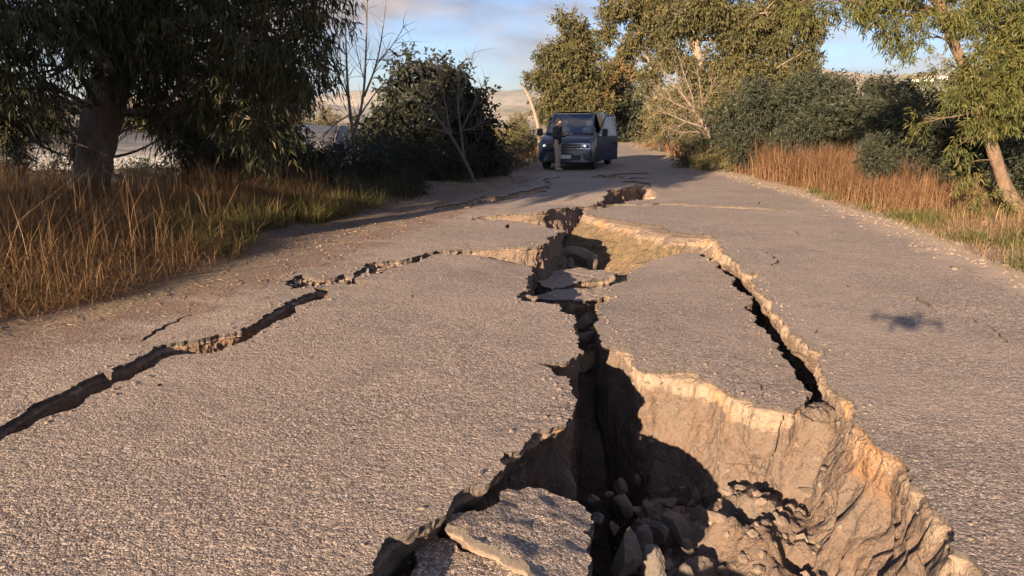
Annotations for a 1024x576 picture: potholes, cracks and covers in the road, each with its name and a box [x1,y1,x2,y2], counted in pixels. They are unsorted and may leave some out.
crack [593,203,829,235]
crack [0,249,472,441]
crack [716,248,842,423]
crack [433,176,560,211]
crack [956,314,1024,348]
crack [899,295,938,312]
